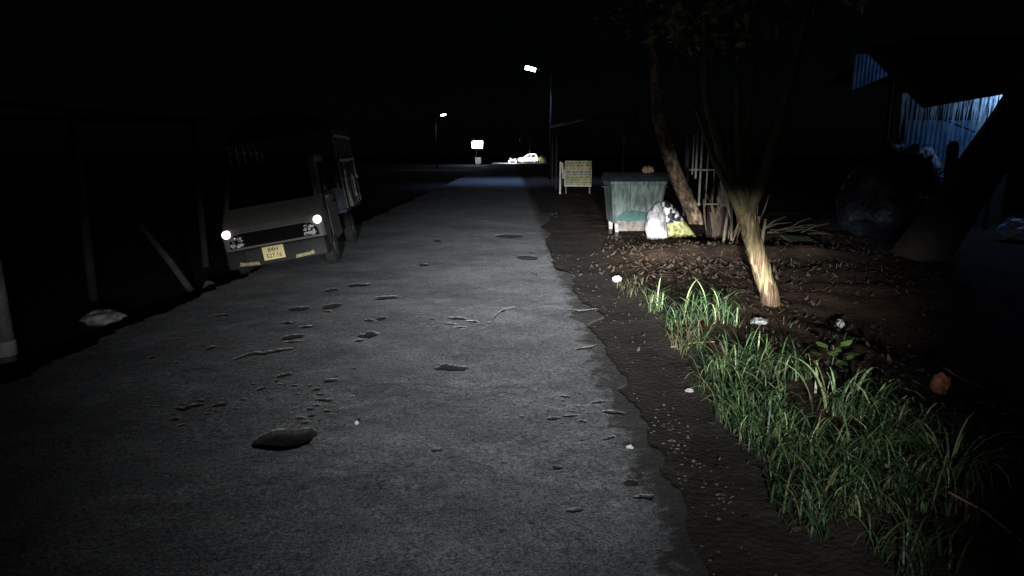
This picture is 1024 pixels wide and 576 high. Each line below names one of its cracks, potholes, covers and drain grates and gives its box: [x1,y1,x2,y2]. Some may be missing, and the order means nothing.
pothole [352,331,379,342]
pothole [320,303,342,313]
